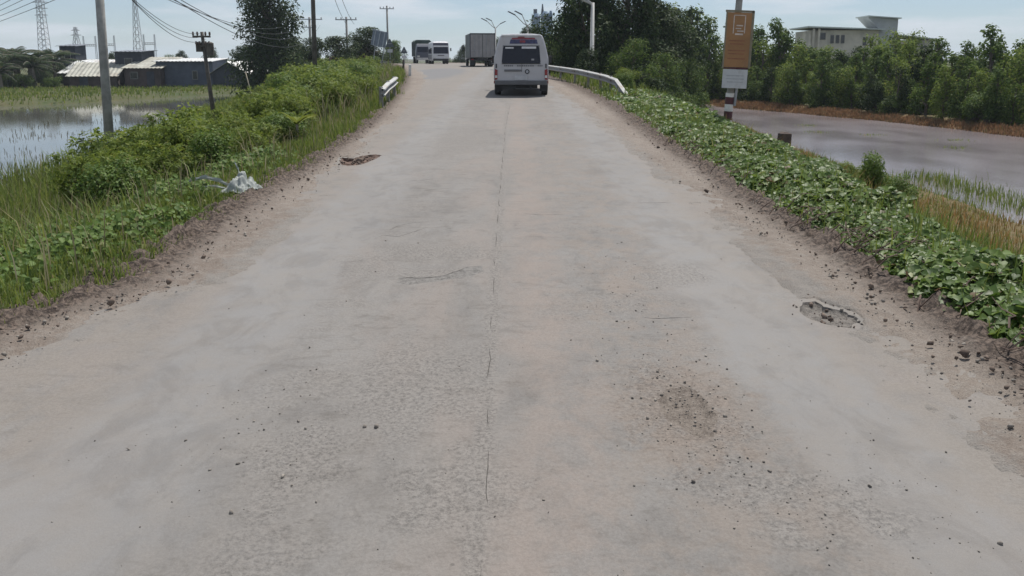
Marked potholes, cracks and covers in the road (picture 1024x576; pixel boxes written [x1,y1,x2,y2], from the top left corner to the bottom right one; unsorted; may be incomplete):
pothole [800,301,858,328]
pothole [340,154,381,166]
pothole [658,386,718,438]
